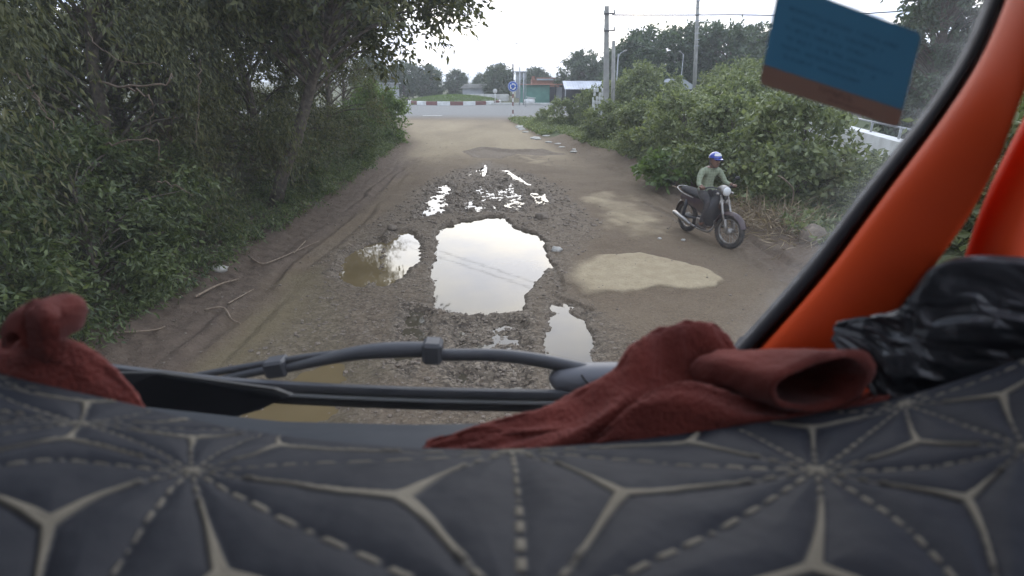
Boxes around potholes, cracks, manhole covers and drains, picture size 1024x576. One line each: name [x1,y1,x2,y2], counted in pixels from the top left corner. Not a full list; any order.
pothole [474,162,494,179]
pothole [319,226,428,292]
pothole [520,187,560,206]
pothole [497,167,539,186]
pothole [406,179,461,221]
pothole [415,213,564,320]
pothole [528,294,619,389]
pothole [454,178,533,213]
